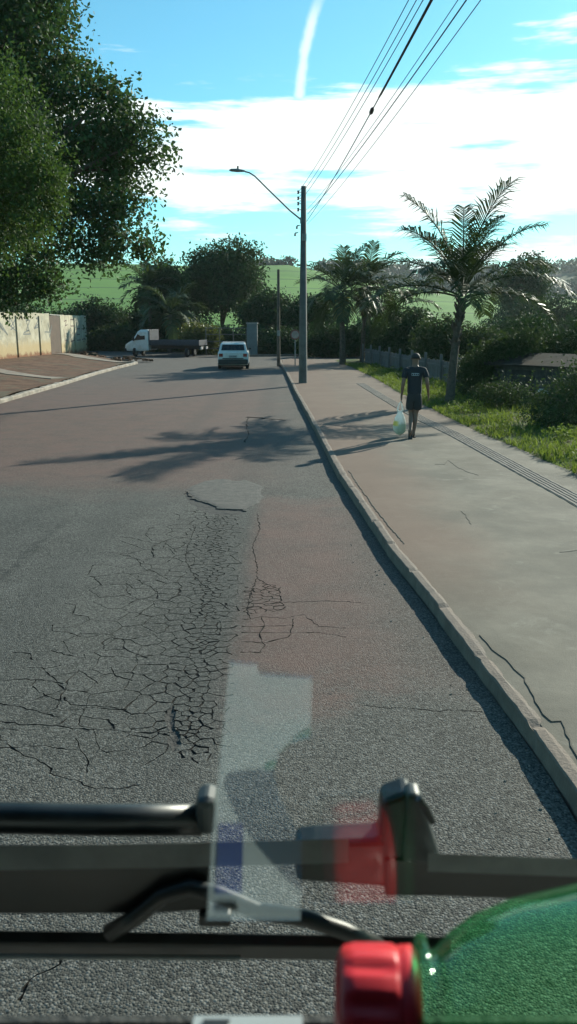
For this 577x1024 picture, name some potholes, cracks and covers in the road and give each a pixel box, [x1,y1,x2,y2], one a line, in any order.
crack [0,510,244,789]
crack [17,960,62,1001]
crack [366,635,577,757]
crack [348,470,404,544]
